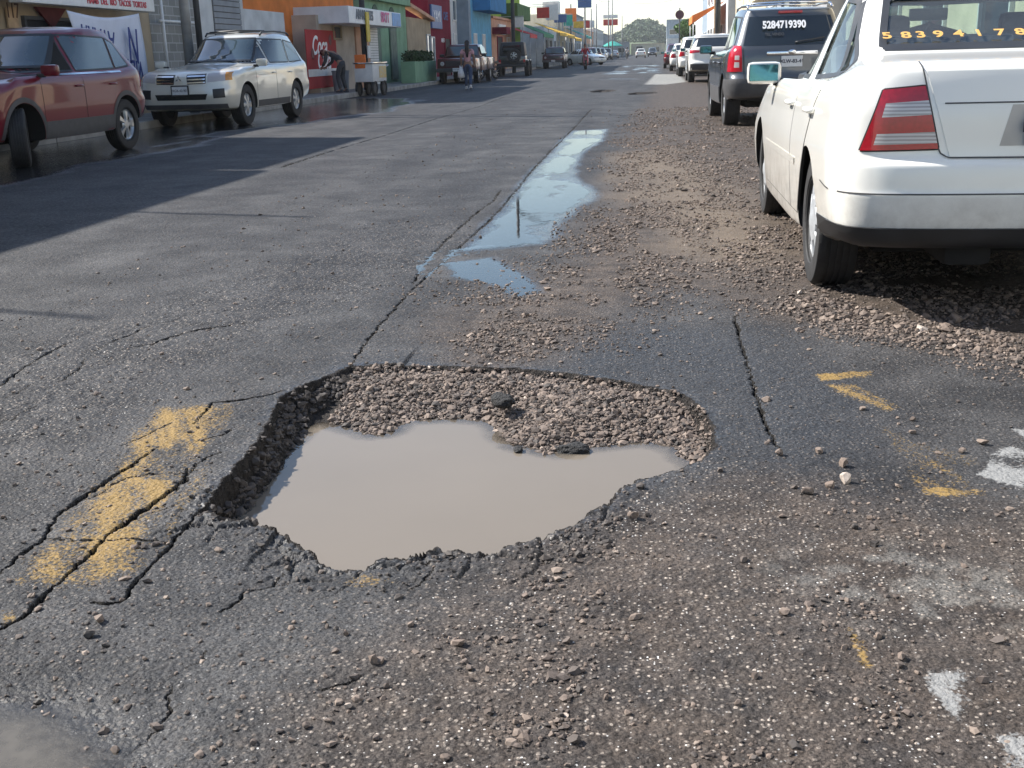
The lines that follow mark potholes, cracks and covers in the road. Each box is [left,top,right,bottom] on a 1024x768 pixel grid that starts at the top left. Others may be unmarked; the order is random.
crack [0,323,243,424]
pothole [198,362,718,573]
crack [352,110,591,363]
crack [733,316,782,449]
